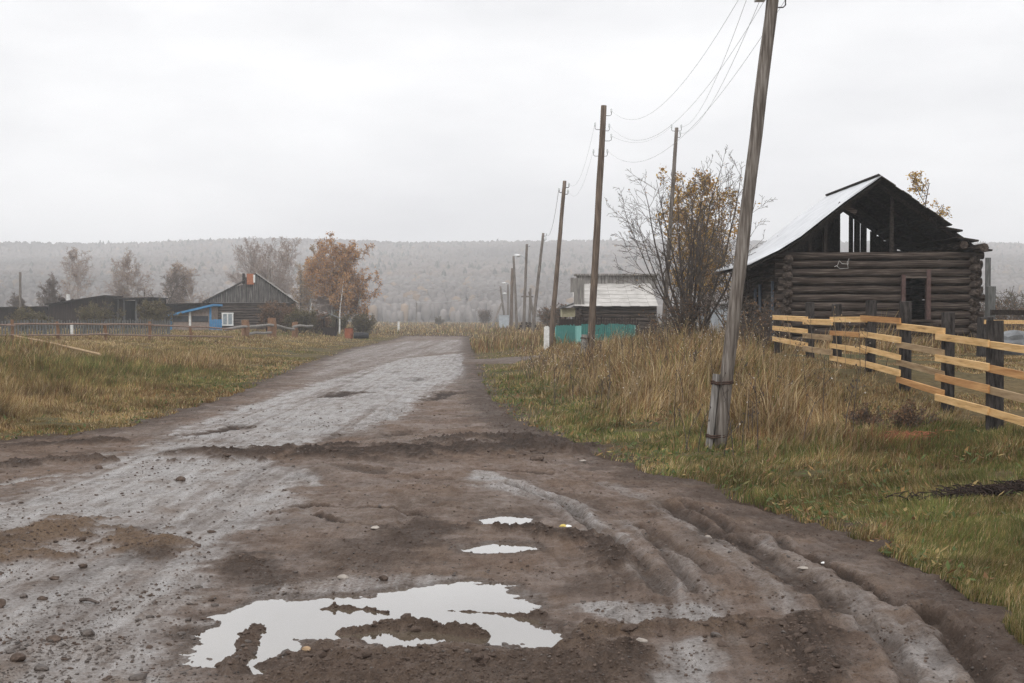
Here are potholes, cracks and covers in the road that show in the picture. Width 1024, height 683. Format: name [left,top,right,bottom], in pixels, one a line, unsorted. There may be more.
pothole [167,578,572,675]
pothole [459,542,540,554]
pothole [478,514,534,525]
